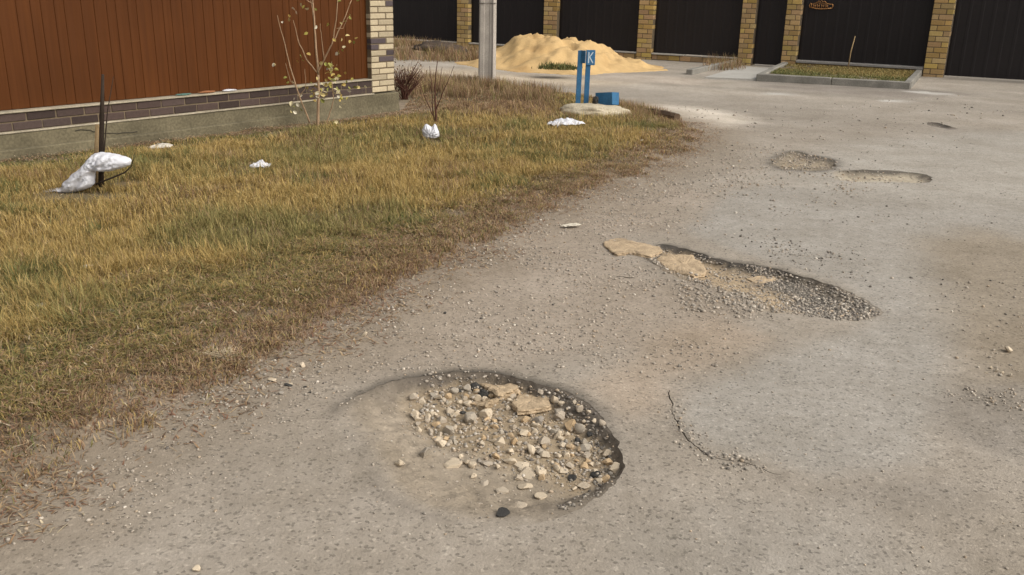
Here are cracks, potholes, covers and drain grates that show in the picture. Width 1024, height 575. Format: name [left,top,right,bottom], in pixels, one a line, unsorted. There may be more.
pothole [927,122,957,131]
pothole [643,244,884,322]
pothole [769,151,836,171]
crack [668,390,774,474]
pothole [337,372,625,526]
pothole [830,170,932,183]
